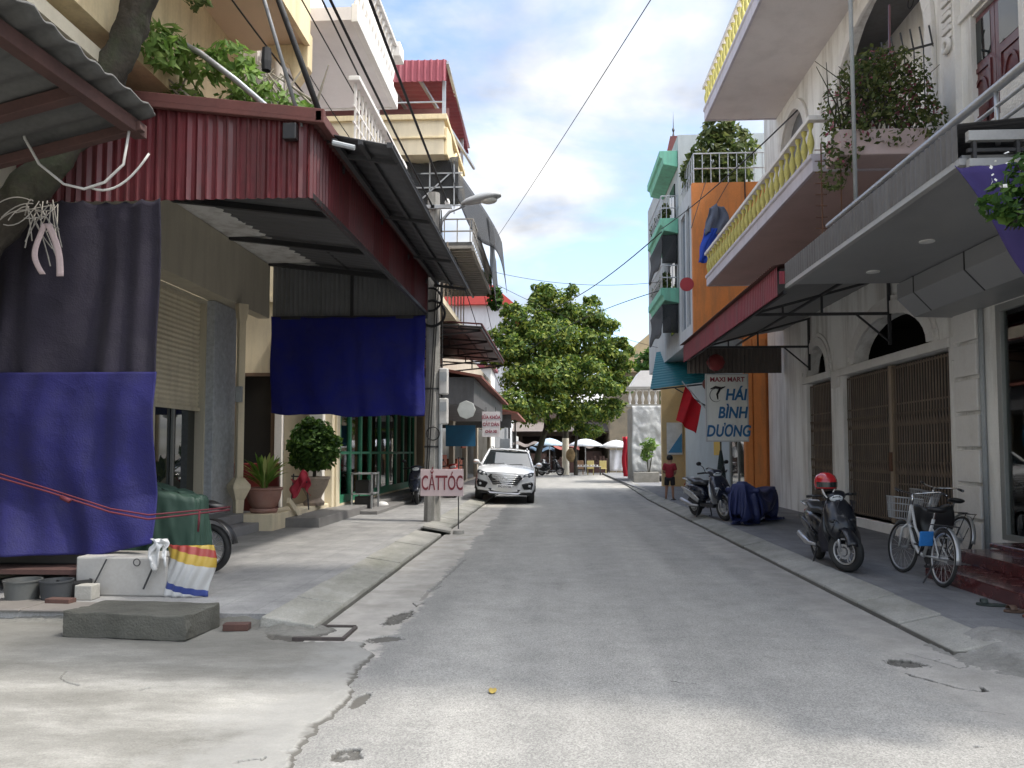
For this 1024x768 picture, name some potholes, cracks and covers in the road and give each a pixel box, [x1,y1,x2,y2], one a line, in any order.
crack [900,652,1013,717]
pothole [317,745,375,766]
pothole [874,657,939,672]
pothole [353,634,411,645]
pothole [370,607,424,631]
pothole [340,689,377,713]
crack [52,670,86,688]
